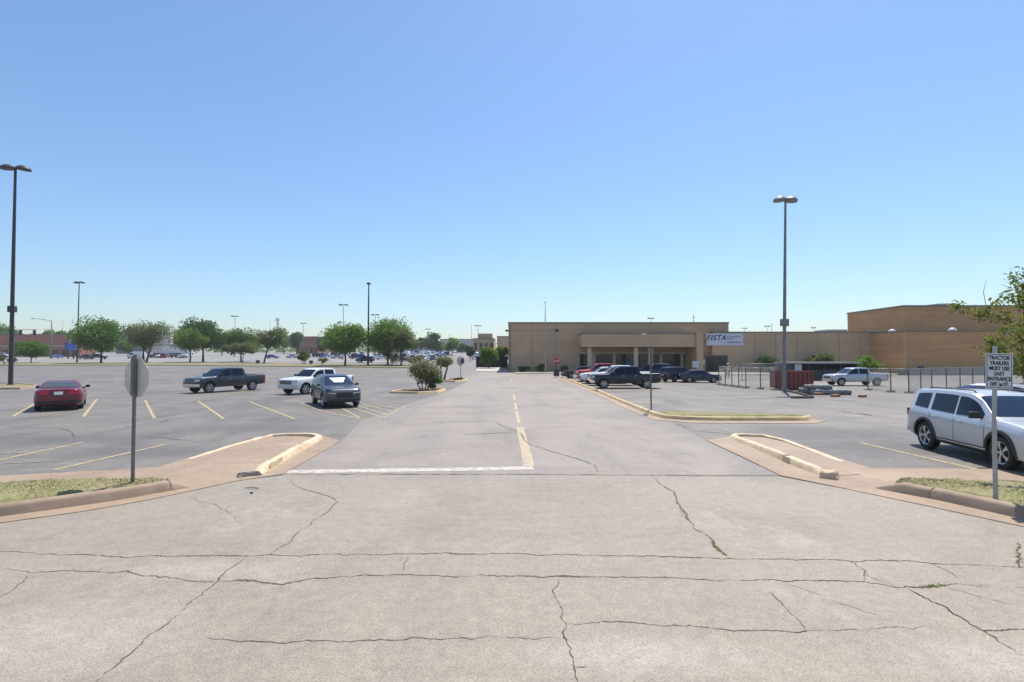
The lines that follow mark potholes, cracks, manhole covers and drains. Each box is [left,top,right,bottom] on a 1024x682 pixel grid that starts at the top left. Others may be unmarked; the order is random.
crack [5,476,1024,682]
